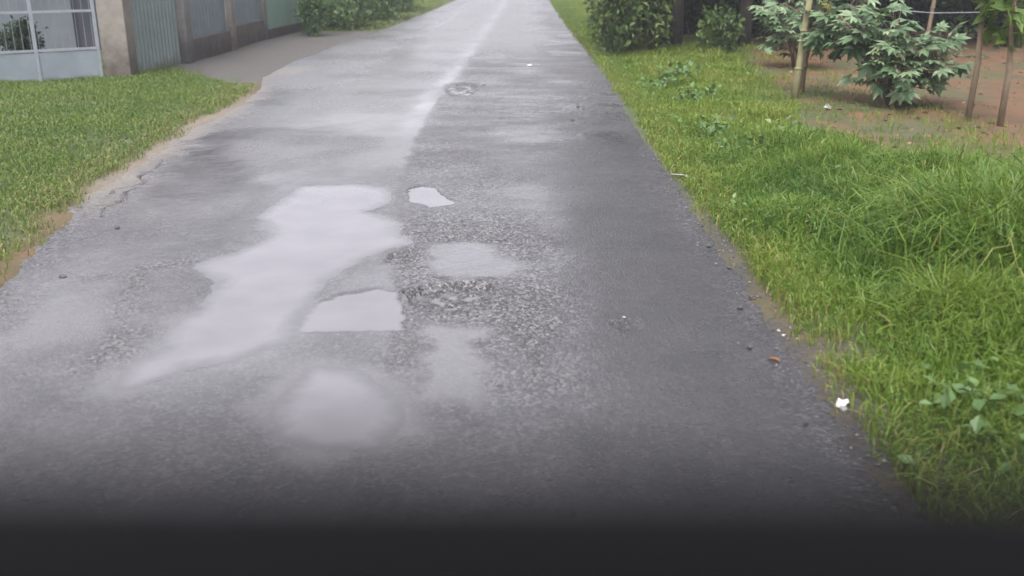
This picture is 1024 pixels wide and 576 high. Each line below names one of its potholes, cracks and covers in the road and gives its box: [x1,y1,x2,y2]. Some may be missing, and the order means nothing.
pothole [441,82,488,97]
crack [93,158,177,219]
pothole [302,285,414,335]
pothole [400,184,463,208]
pothole [400,277,503,318]
